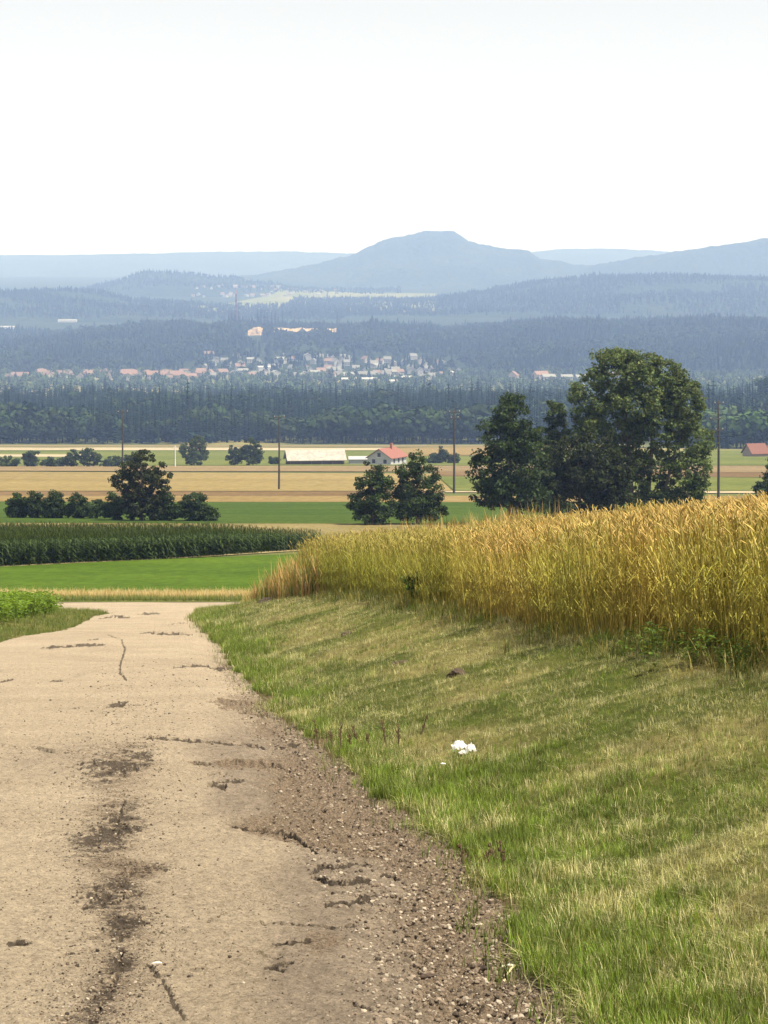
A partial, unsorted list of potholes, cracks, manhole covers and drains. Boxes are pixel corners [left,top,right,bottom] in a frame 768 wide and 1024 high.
crack [41,612,193,681]
pothole [5,939,33,947]
crack [229,825,397,930]
crack [43,799,230,1024]
crack [0,736,301,783]
